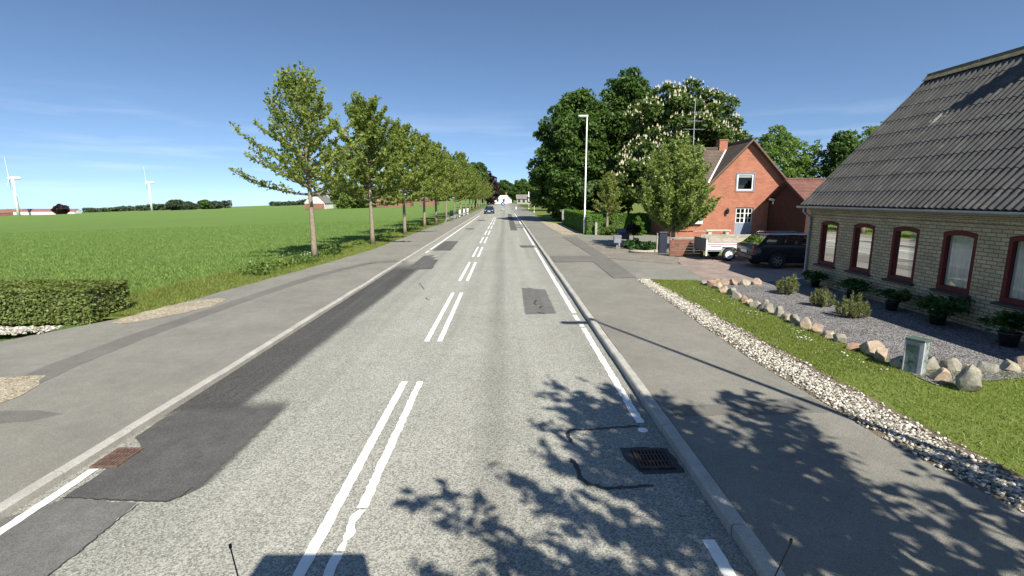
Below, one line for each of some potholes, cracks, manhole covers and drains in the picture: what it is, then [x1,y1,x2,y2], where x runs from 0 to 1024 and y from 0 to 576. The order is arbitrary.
drain grate [89,447,144,469]
drain grate [631,449,676,469]
